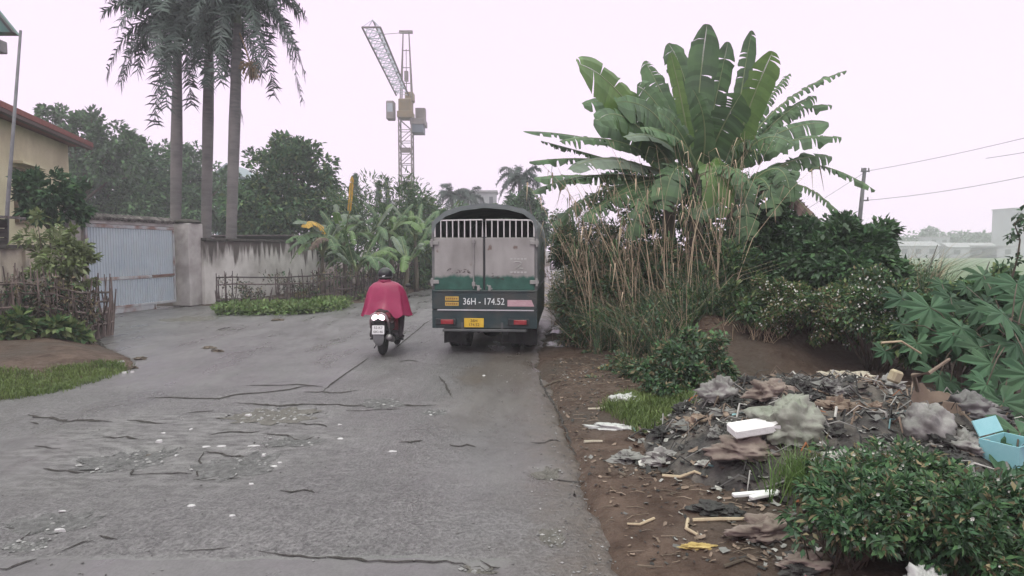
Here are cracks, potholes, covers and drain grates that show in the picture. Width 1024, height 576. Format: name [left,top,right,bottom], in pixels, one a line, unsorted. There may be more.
crack [260,551,500,572]
crack [28,414,156,439]
pothole [71,450,167,473]
crack [124,423,327,481]
crack [151,376,453,413]
pothole [5,511,105,536]
pothole [189,451,281,482]
pothole [219,407,326,426]
pothole [144,447,183,459]
